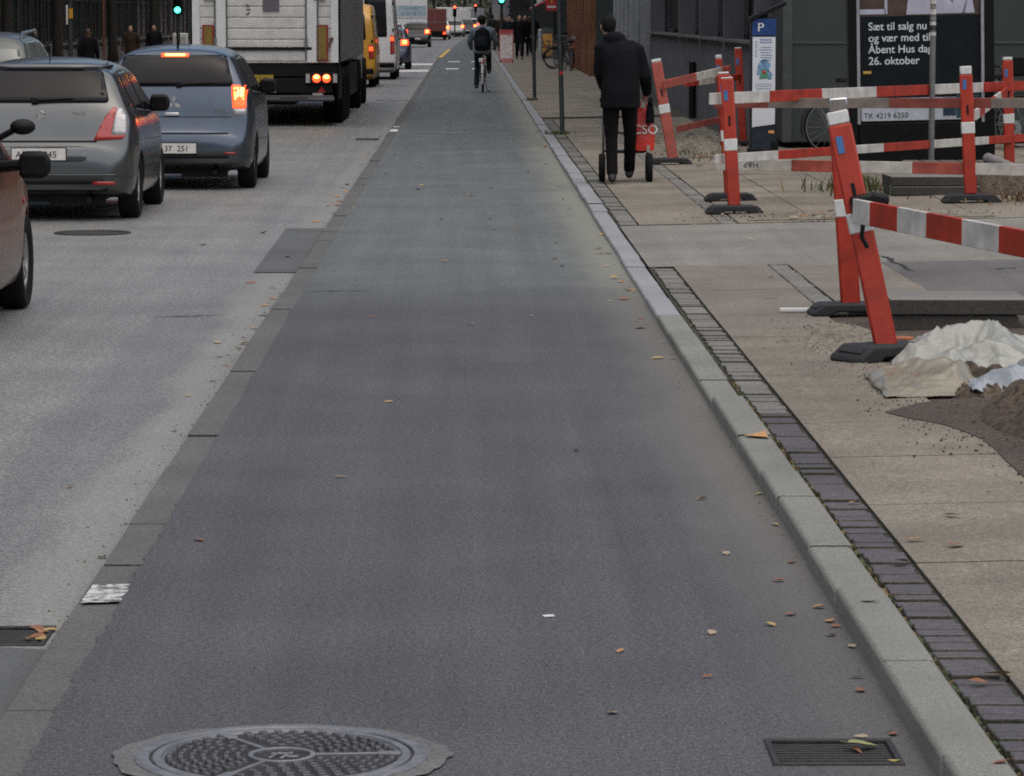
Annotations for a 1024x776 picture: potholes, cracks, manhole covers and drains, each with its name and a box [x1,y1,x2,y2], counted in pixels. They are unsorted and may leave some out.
drain grate [0,626,56,646]
drain grate [764,738,905,766]
manhole cover [112,724,453,776]
